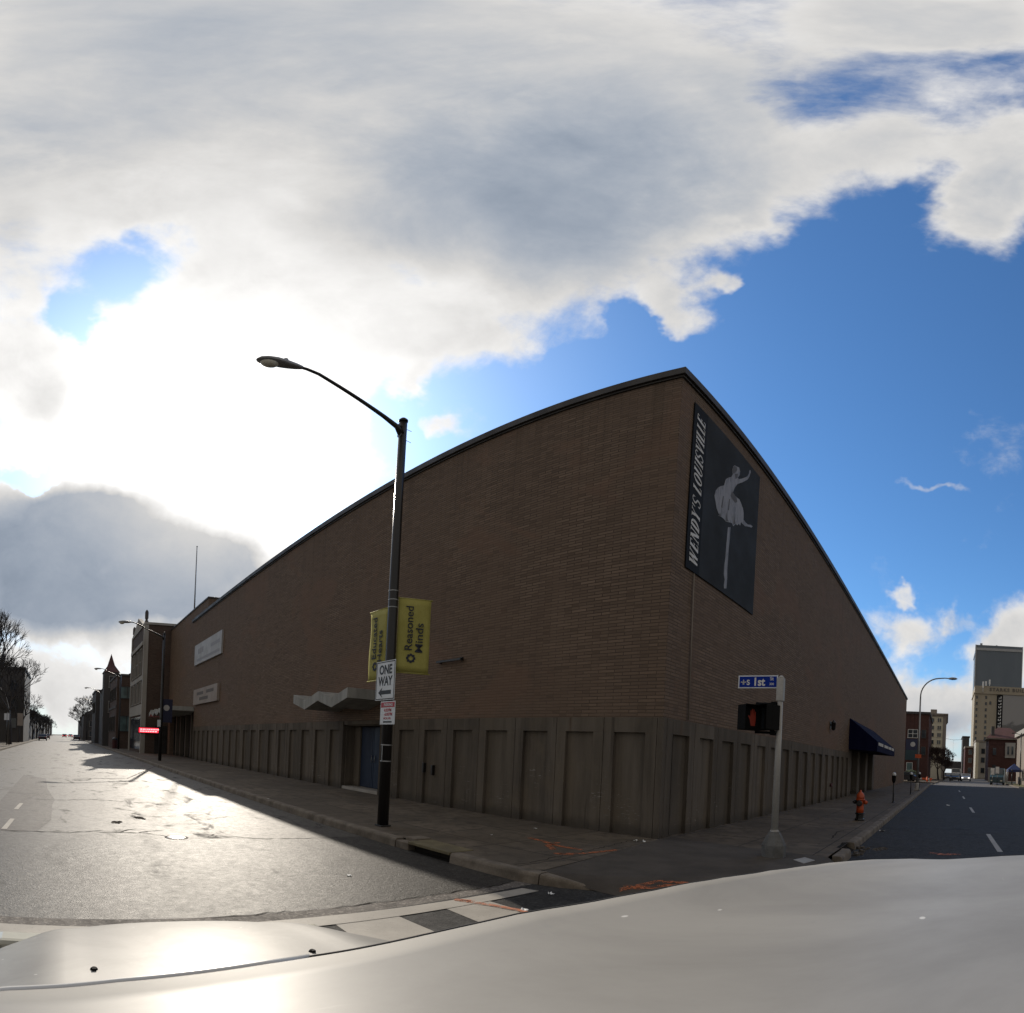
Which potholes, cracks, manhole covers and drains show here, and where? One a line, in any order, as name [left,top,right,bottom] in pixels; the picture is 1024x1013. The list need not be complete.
drain grate [396,835,474,862]
